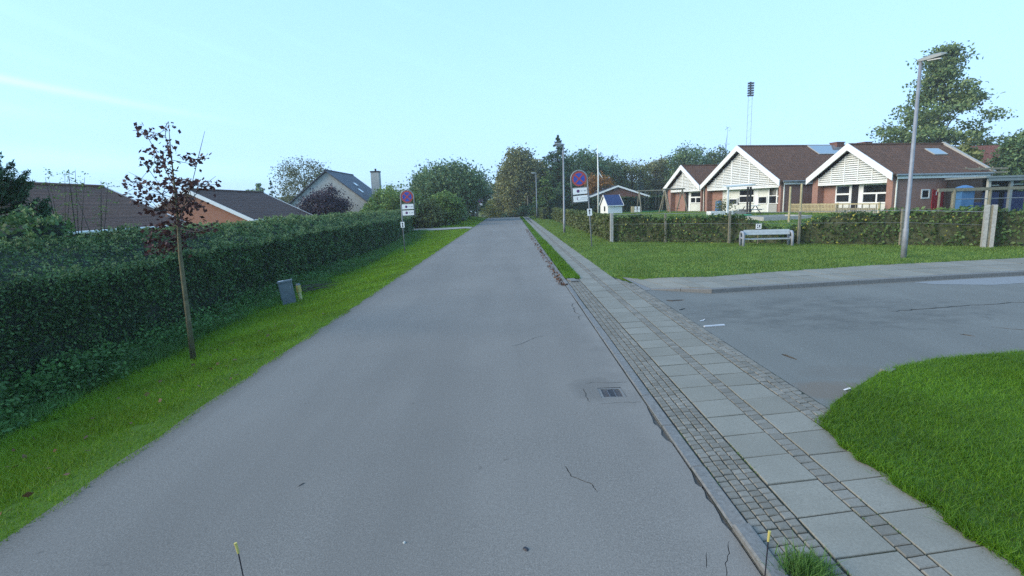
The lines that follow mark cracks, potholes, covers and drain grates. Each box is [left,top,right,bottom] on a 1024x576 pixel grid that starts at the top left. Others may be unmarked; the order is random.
drain grate [598,388,626,398]
